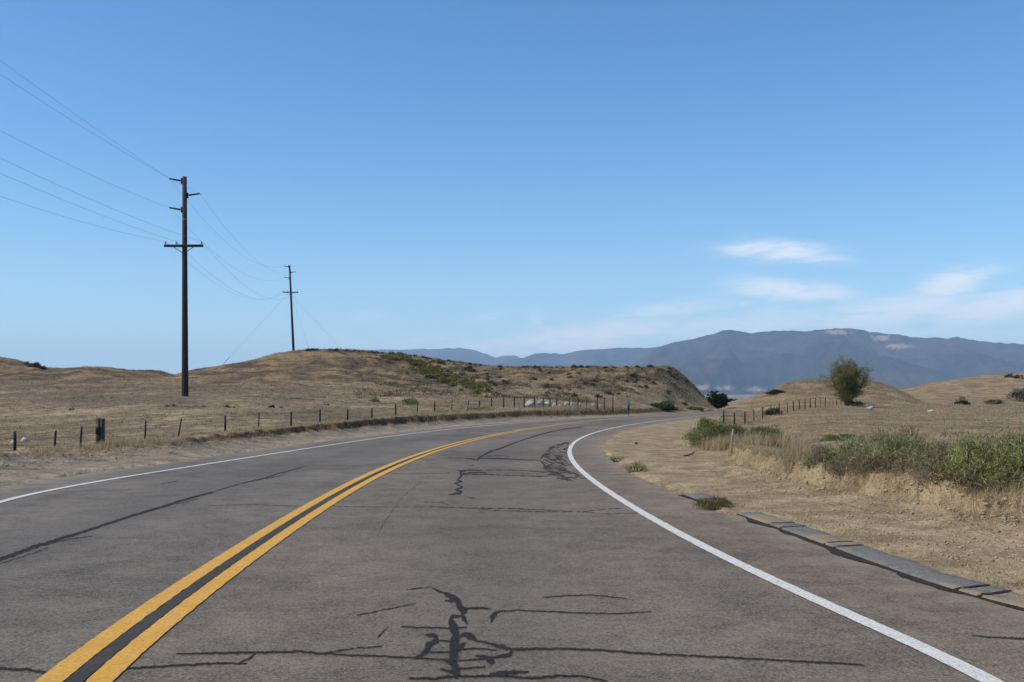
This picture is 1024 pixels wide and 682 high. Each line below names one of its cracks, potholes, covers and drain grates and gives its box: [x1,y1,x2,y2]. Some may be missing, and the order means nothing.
crack [489,594,652,623]
crack [343,502,637,514]
